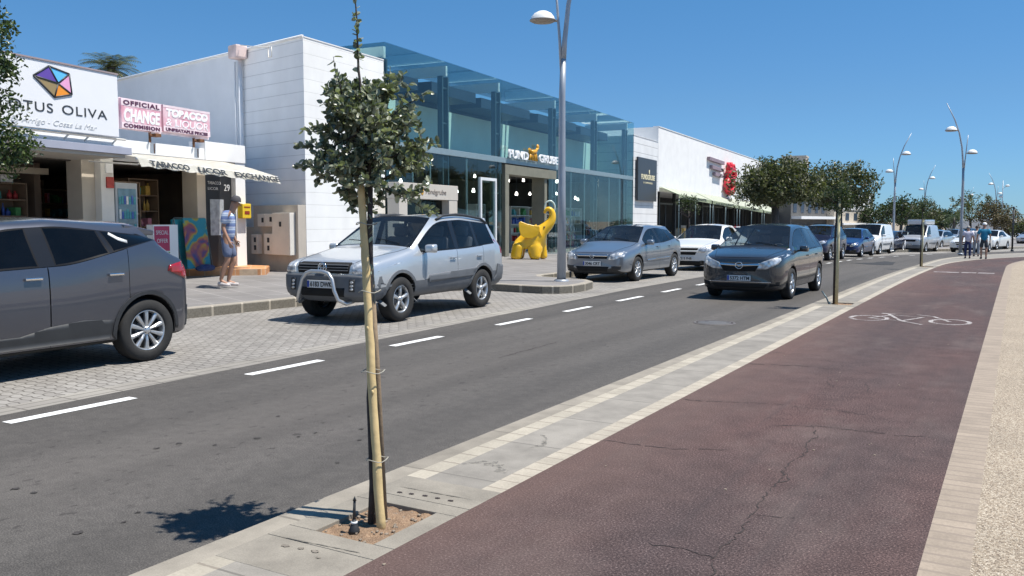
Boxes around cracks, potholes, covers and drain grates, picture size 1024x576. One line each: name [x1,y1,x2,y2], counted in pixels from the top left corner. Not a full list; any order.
crack [650,352,925,576]
